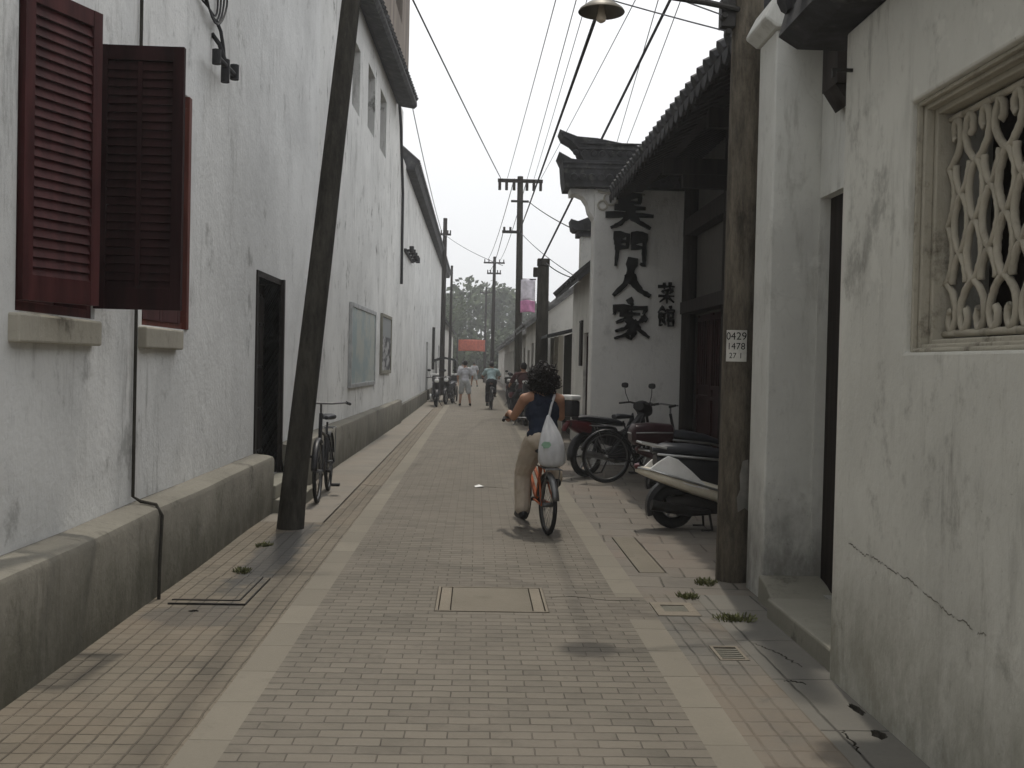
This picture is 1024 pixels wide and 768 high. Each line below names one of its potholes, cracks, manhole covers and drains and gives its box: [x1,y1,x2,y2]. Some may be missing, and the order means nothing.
crack [754,643,806,685]
crack [841,730,862,755]
manhole cover [435,586,549,613]
manhole cover [168,576,270,606]
drain grate [709,646,750,661]
manhole cover [612,537,665,573]
